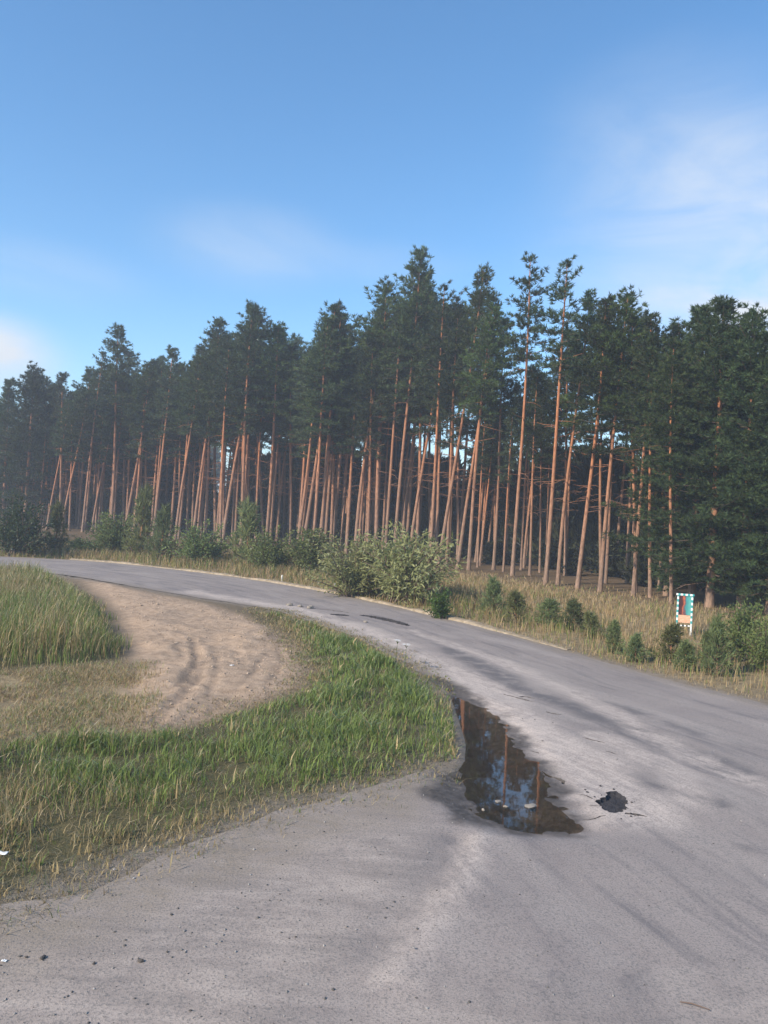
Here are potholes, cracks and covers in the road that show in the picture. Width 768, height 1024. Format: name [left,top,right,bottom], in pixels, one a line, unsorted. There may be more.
pothole [584,785,639,819]
